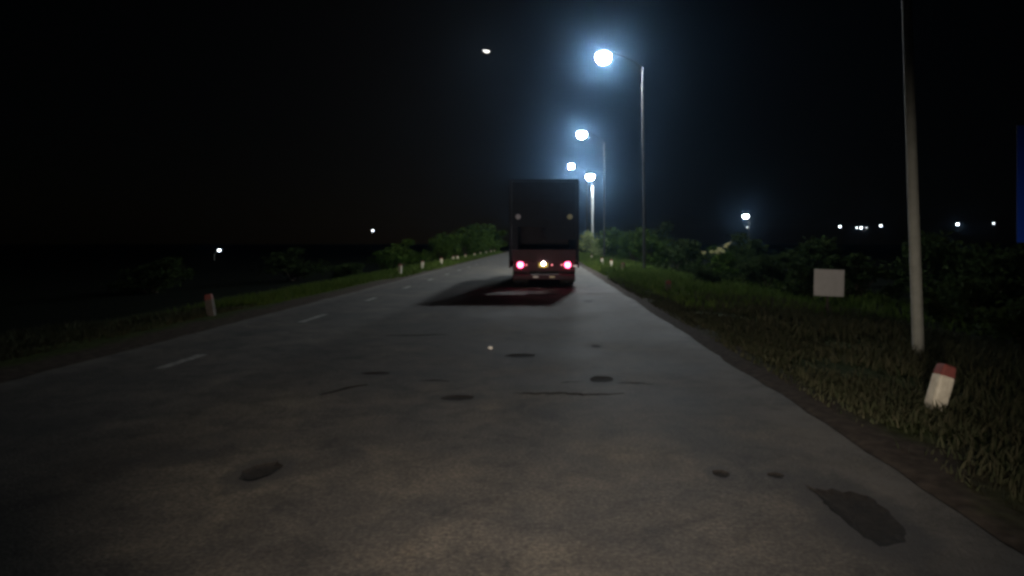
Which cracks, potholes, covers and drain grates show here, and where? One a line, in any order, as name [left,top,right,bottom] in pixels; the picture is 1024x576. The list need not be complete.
crack [319,385,365,395]
pothole [238,461,283,482]
crack [516,381,645,396]
pothole [712,470,730,478]
